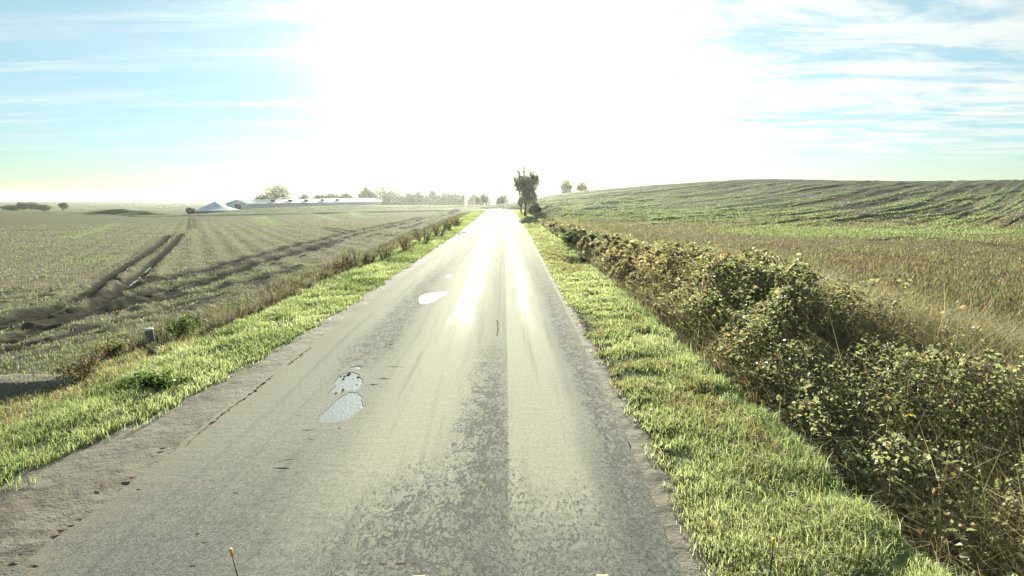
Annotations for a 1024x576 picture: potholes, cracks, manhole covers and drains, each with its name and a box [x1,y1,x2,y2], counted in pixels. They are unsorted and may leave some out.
pothole [318,392,365,423]
pothole [328,372,364,394]
pothole [419,292,447,304]
crack [186,348,310,446]
